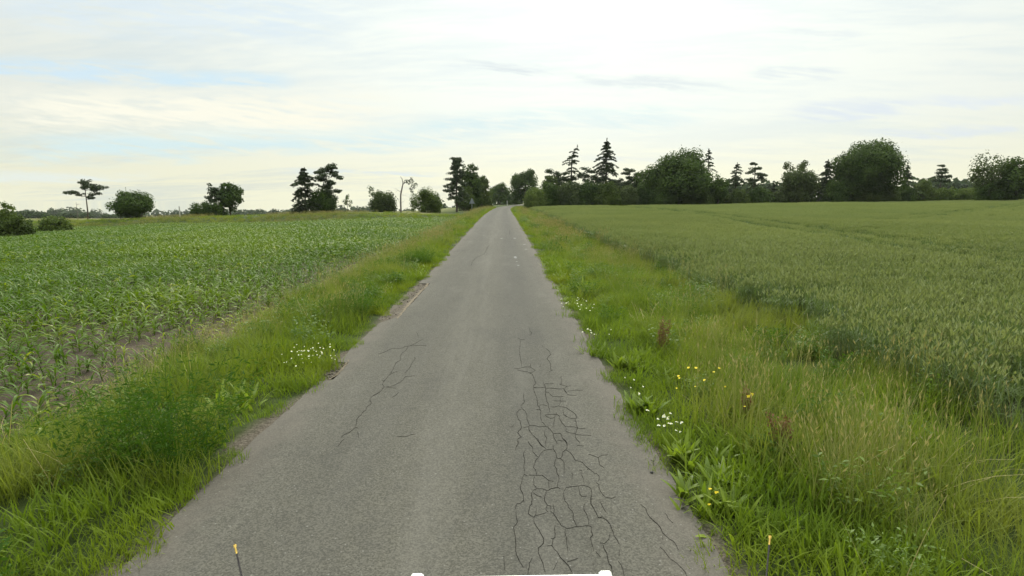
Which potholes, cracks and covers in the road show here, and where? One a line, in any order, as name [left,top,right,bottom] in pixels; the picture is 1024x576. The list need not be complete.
crack [338,333,426,446]
crack [504,339,624,576]
